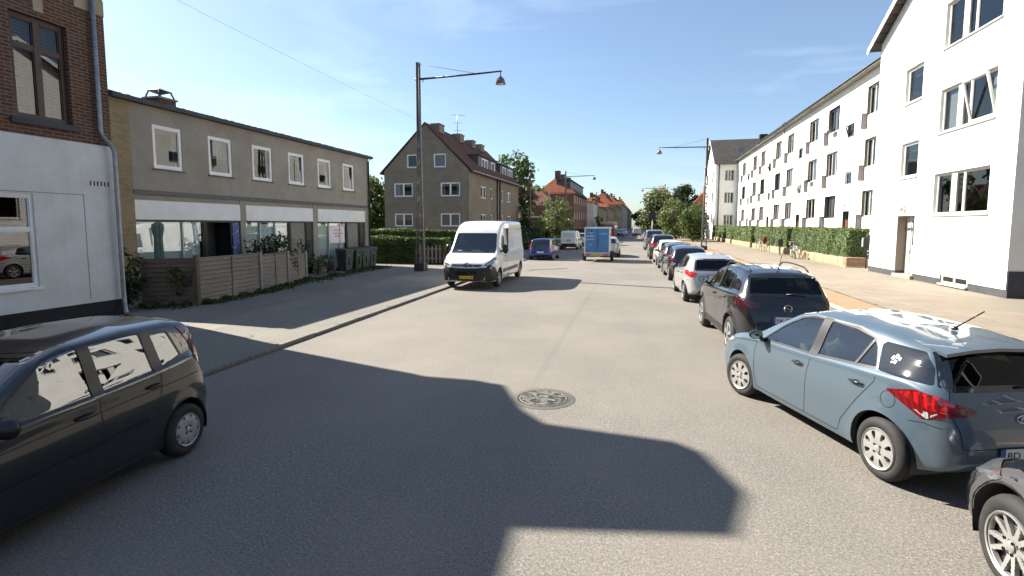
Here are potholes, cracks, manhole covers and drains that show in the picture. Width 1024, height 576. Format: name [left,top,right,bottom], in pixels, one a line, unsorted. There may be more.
manhole cover [511,388,575,409]
